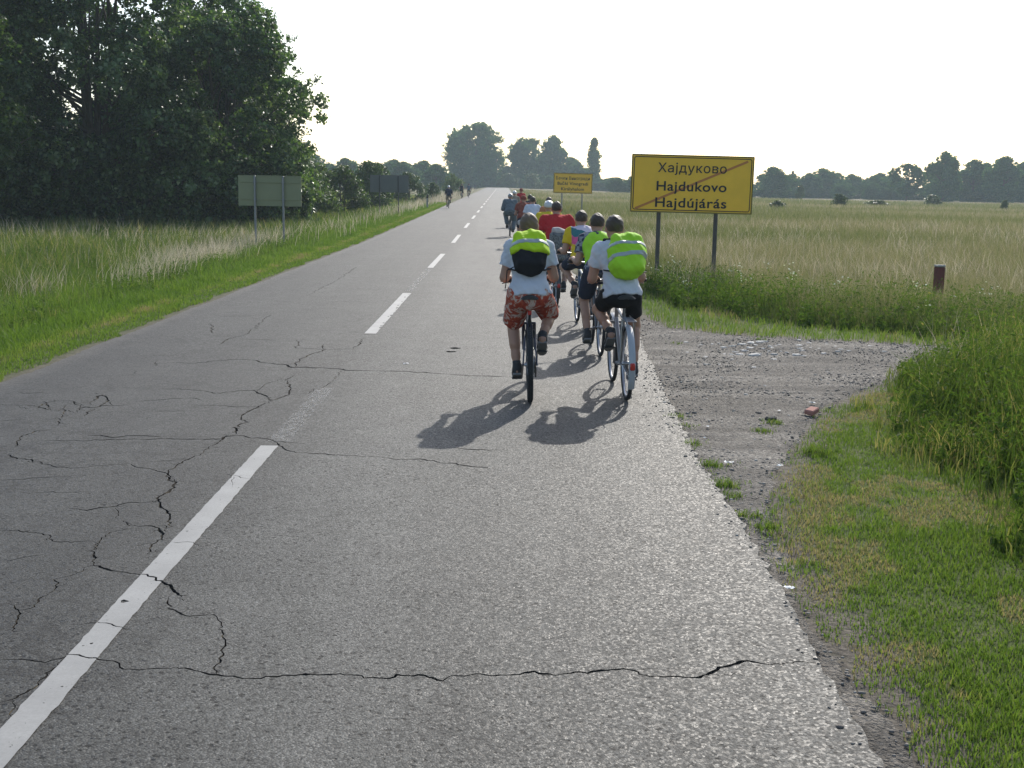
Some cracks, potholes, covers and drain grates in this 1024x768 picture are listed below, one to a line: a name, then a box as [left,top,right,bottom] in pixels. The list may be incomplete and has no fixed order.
crack [1,315,809,723]
